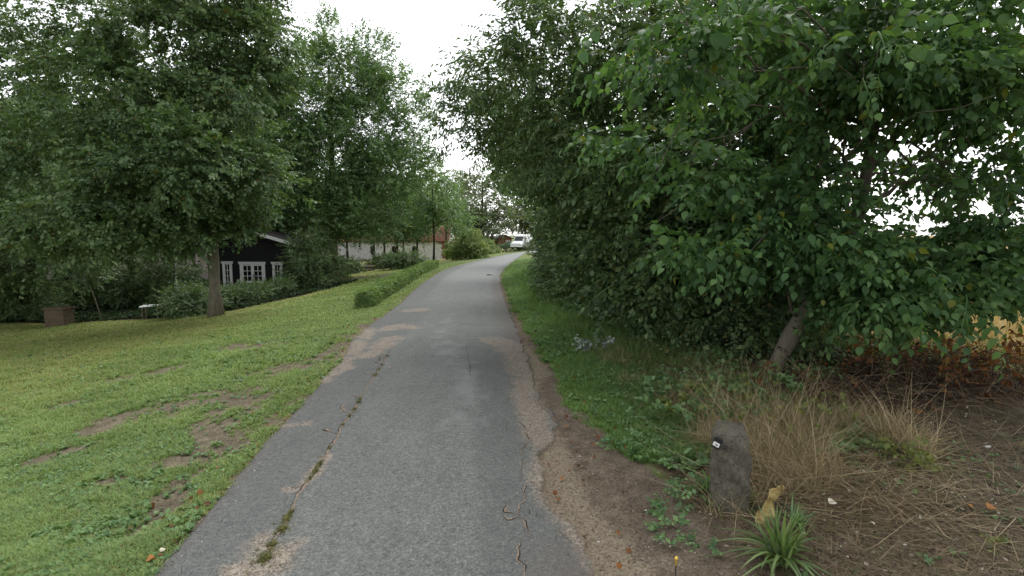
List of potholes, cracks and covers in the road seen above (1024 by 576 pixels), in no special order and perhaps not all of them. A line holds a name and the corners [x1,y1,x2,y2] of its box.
crack [247,351,391,575]
crack [501,399,557,576]
